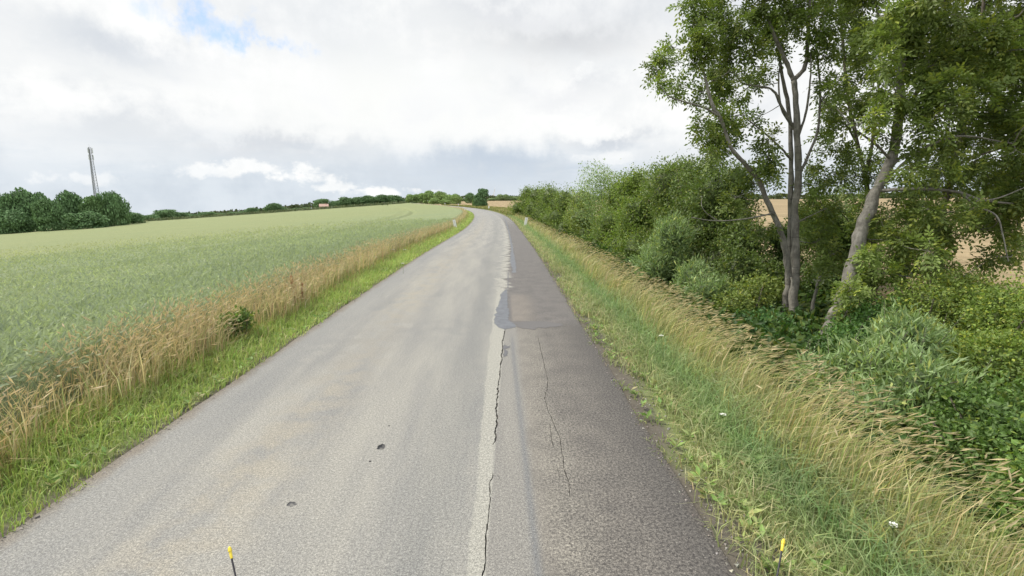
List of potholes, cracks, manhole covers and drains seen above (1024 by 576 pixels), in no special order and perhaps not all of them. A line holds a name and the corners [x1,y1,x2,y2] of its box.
crack [538,339,570,495]
